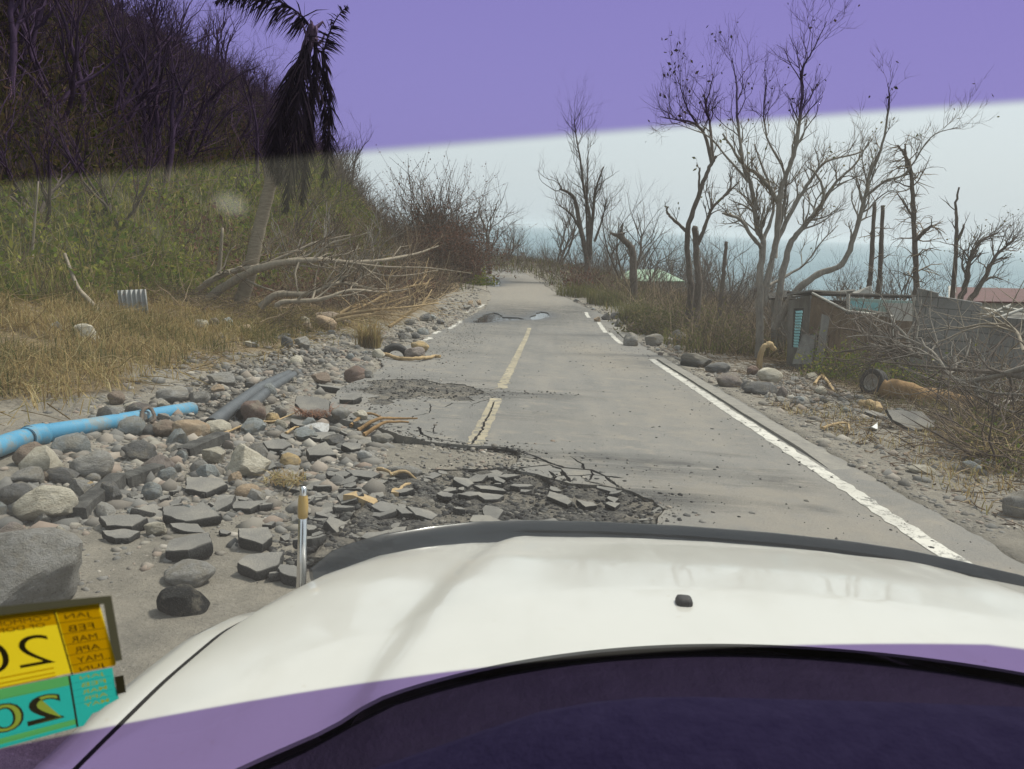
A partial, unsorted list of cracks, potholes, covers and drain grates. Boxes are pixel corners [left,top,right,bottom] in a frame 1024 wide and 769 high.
pothole [307,468,664,562]
crack [407,396,624,489]
